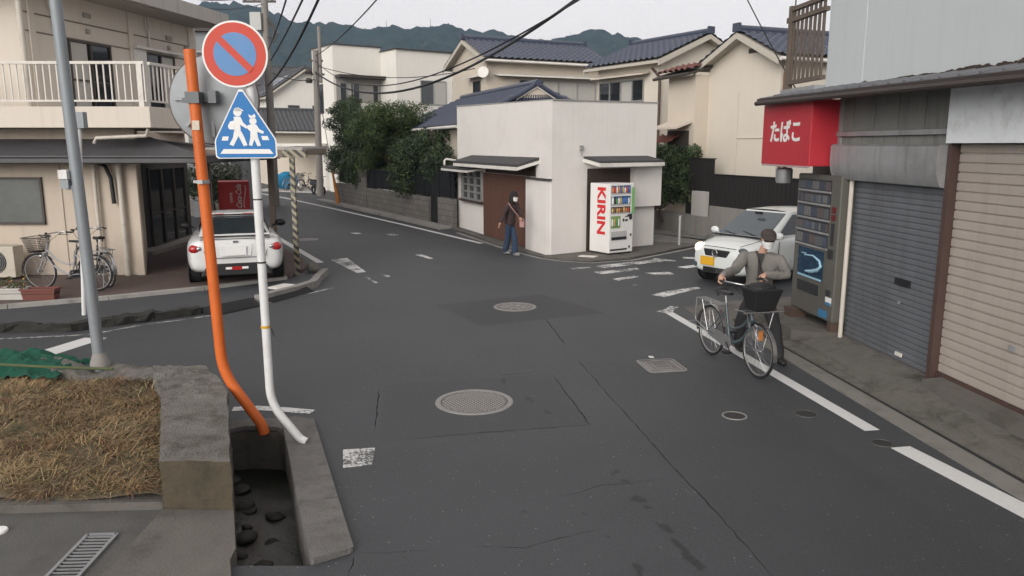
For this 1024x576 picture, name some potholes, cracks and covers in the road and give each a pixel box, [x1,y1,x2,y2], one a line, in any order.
manhole cover [794,409,819,418]
manhole cover [636,358,687,373]
crack [547,321,772,576]
drain grate [45,532,119,576]
manhole cover [494,302,536,311]
manhole cover [722,411,747,420]
manhole cover [435,389,513,415]
manhole cover [870,439,894,447]
